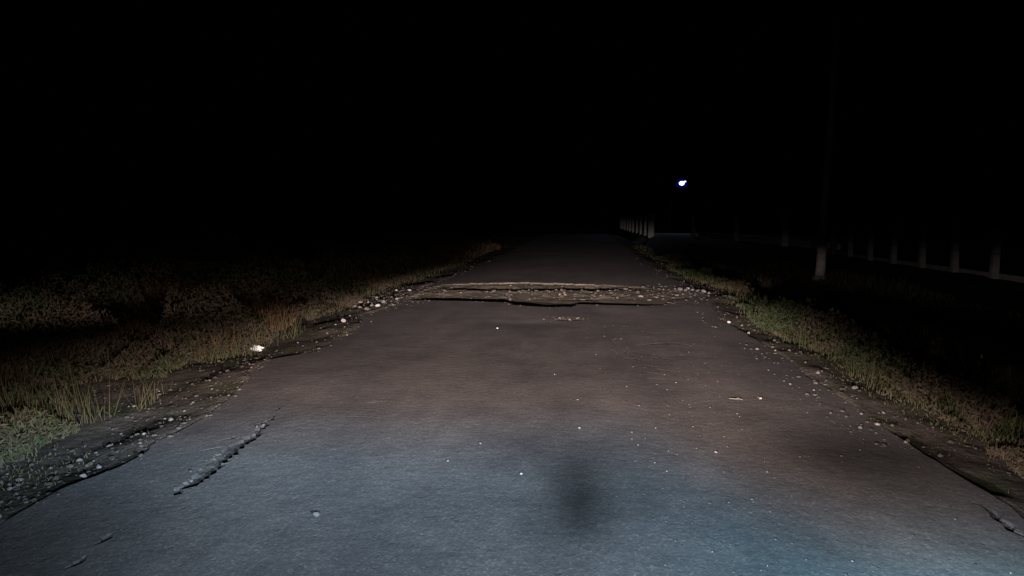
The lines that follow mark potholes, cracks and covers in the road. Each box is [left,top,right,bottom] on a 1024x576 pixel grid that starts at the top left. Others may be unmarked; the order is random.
crack [968,500,1024,537]
crack [64,407,280,570]
